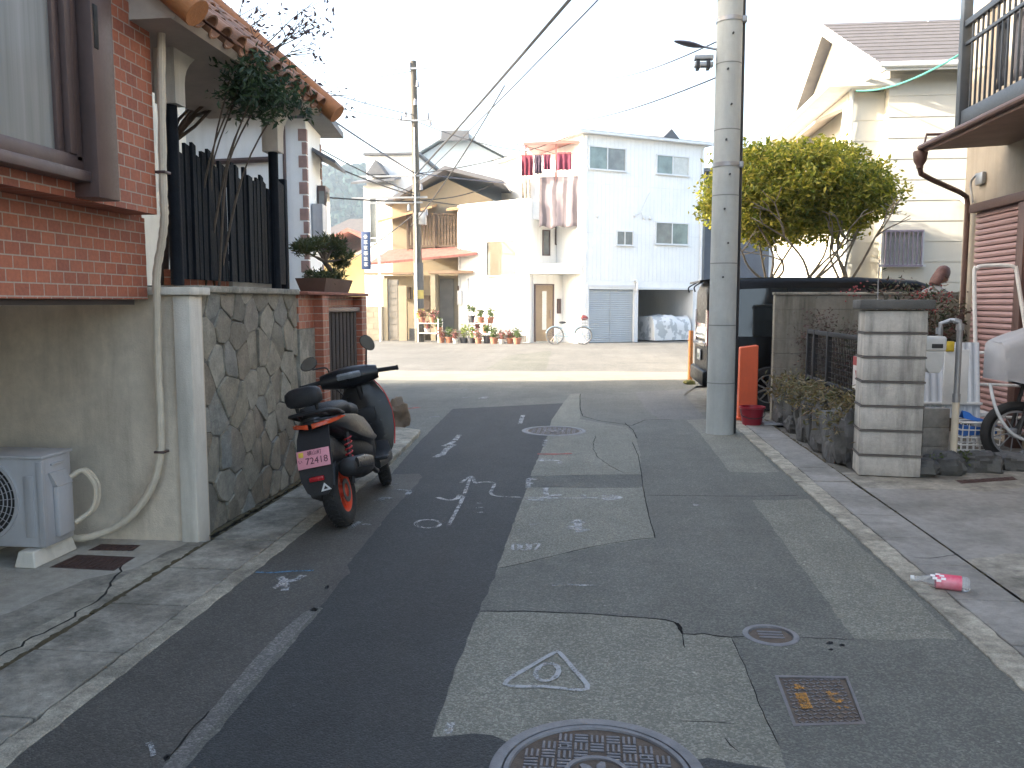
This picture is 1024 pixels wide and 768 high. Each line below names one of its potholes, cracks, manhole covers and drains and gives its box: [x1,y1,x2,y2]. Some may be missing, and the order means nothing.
manhole cover [522,426,586,436]
crack [501,394,793,568]
utility cover [742,624,800,646]
crack [0,562,123,656]
manhole cover [489,719,703,768]
